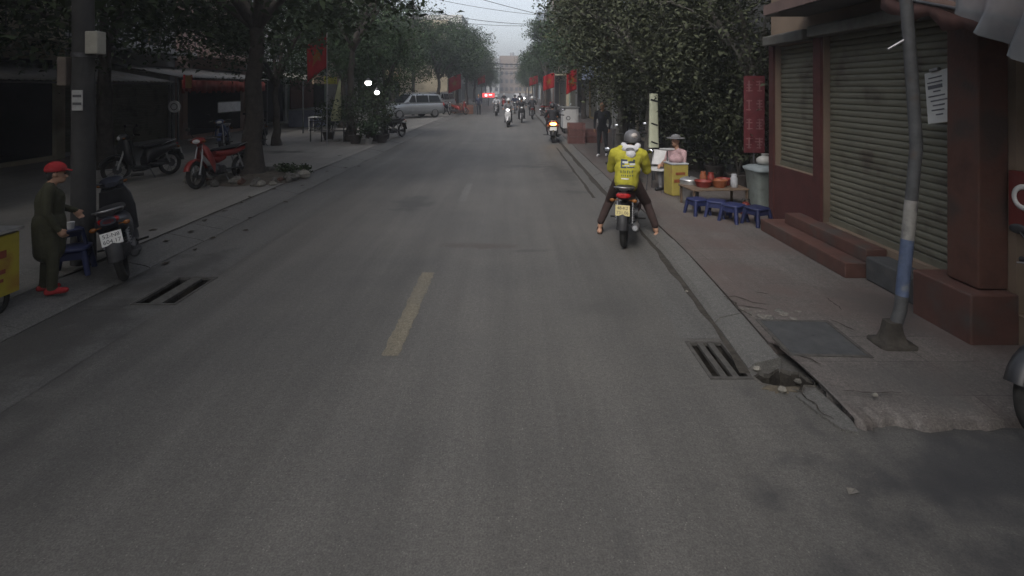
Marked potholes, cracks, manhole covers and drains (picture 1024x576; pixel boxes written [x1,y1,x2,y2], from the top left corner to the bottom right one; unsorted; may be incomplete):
drain grate [685,341,754,379]
manhole cover [755,319,874,358]
crack [724,292,770,318]
drain grate [130,277,218,305]
pothole [752,369,817,392]
